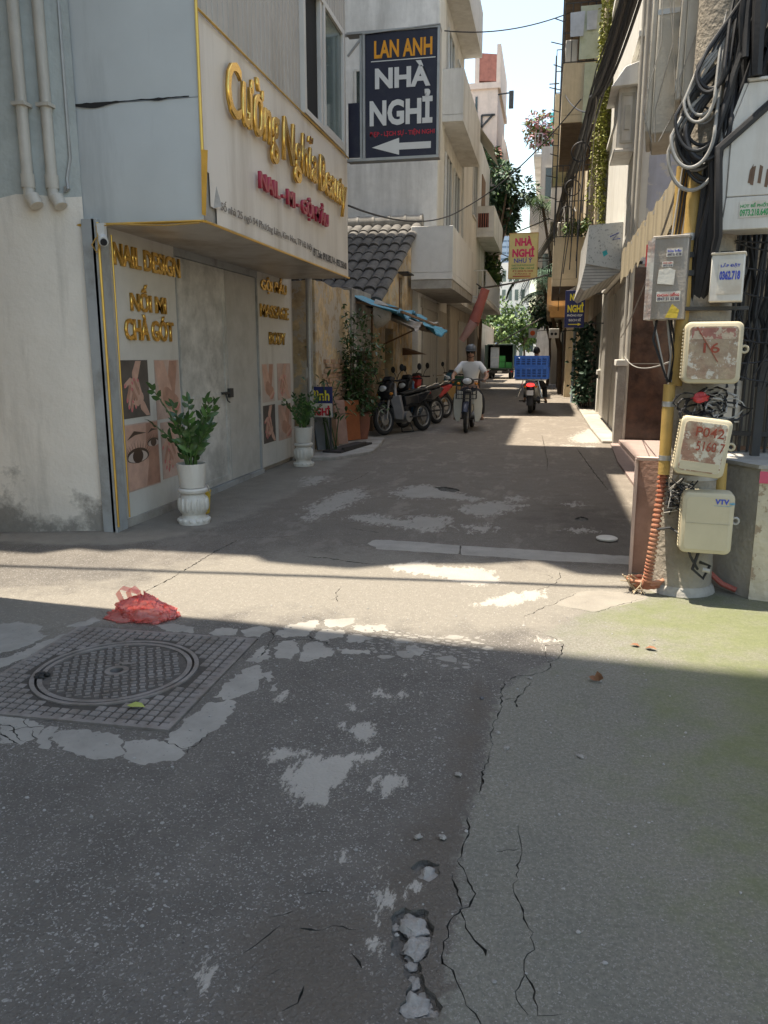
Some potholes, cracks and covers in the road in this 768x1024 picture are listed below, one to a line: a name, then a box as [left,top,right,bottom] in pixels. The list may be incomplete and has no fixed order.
crack [497,832,567,1016]
crack [441,818,487,1024]
crack [244,891,362,1011]
crack [479,631,564,796]
manhole cover [0,626,257,733]
pothole [411,860,440,877]
pothole [390,907,443,1017]
crack [528,571,639,615]
